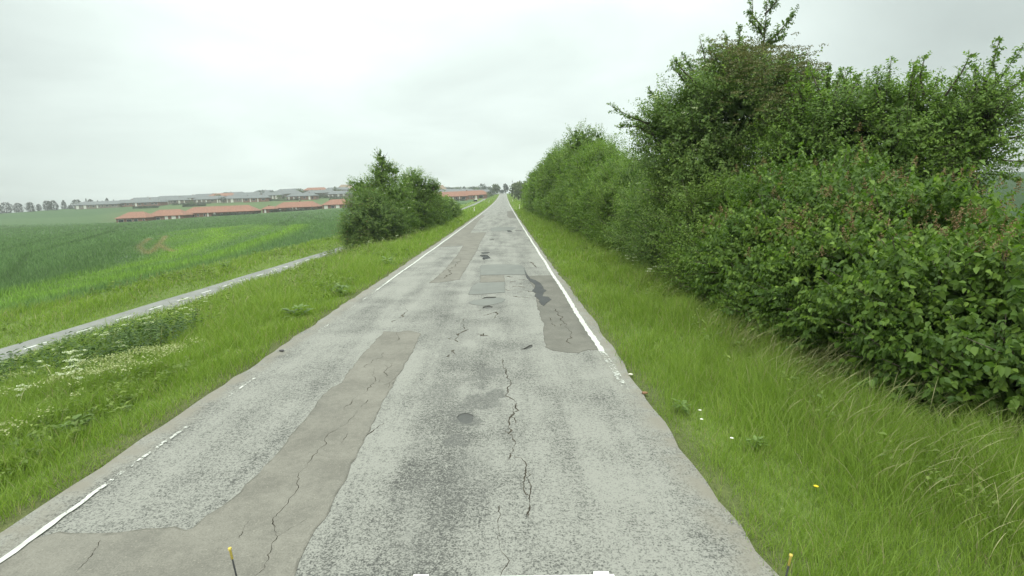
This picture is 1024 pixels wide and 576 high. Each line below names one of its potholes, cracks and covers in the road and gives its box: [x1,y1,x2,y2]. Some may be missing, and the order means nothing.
pothole [457,413,474,424]
crack [259,310,408,573]
crack [502,358,548,518]
crack [447,262,536,357]
crack [496,507,510,576]
